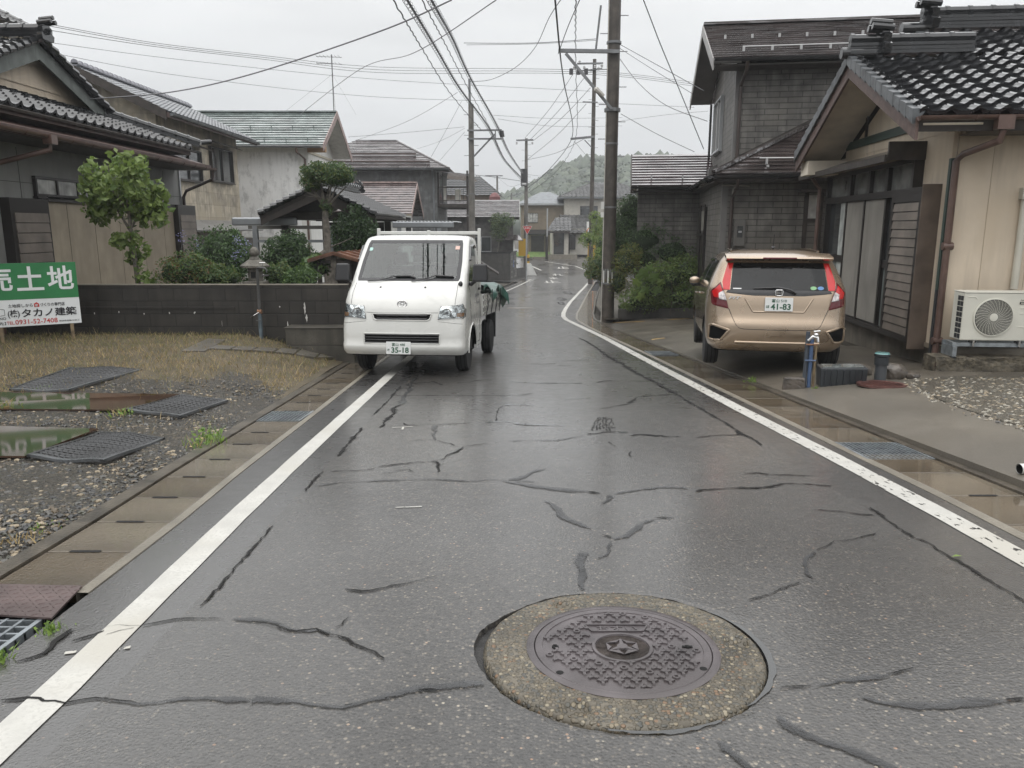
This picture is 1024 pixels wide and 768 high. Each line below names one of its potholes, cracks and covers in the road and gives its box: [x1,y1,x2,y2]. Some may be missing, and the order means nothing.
drain grate [835,442,935,460]
manhole cover [475,593,769,736]
crack [776,696,1023,768]
crack [717,739,754,768]
crack [15,624,134,662]
crack [347,575,436,591]
drain grate [0,618,45,657]
drain grate [256,411,314,422]
crack [335,360,740,473]
crack [575,541,612,590]
crack [753,472,831,487]
